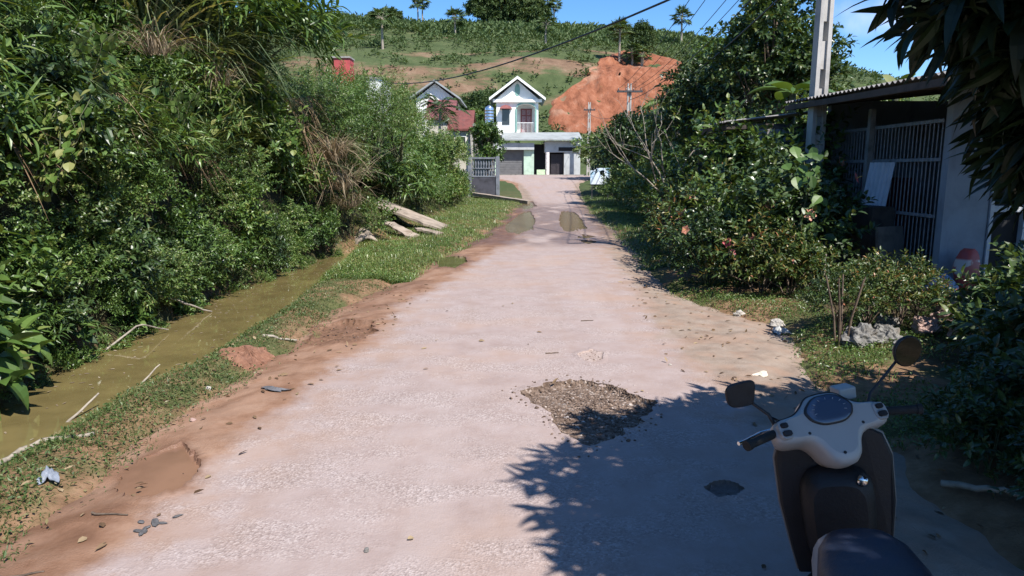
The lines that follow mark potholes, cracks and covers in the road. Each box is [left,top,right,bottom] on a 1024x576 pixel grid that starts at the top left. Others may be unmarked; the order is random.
pothole [555,209,594,238]
pothole [498,209,540,239]
pothole [501,373,665,457]
pothole [692,476,756,503]
